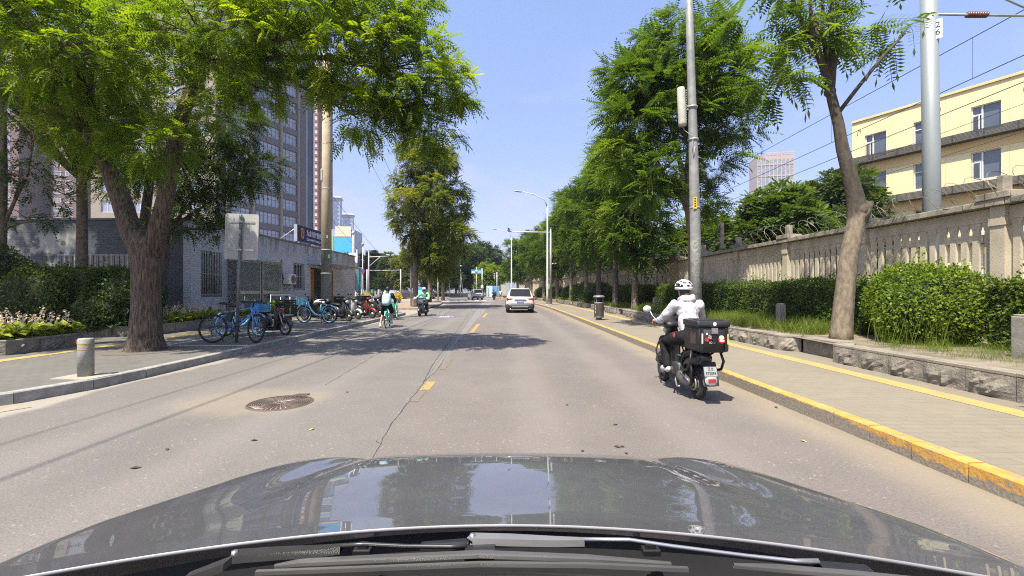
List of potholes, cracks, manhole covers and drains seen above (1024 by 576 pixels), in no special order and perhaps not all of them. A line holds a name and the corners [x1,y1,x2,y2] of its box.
crack [325,311,481,458]
manhole cover [245,393,314,411]
